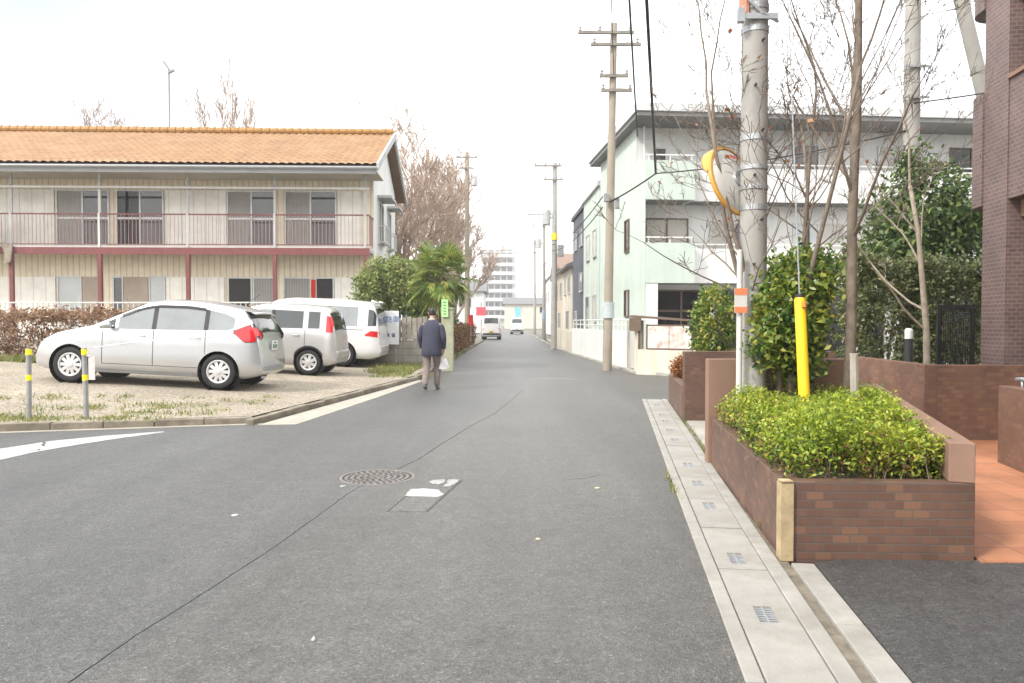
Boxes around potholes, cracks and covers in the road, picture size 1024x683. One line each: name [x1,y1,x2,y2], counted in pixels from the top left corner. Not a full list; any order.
manhole cover [339,469,415,485]
